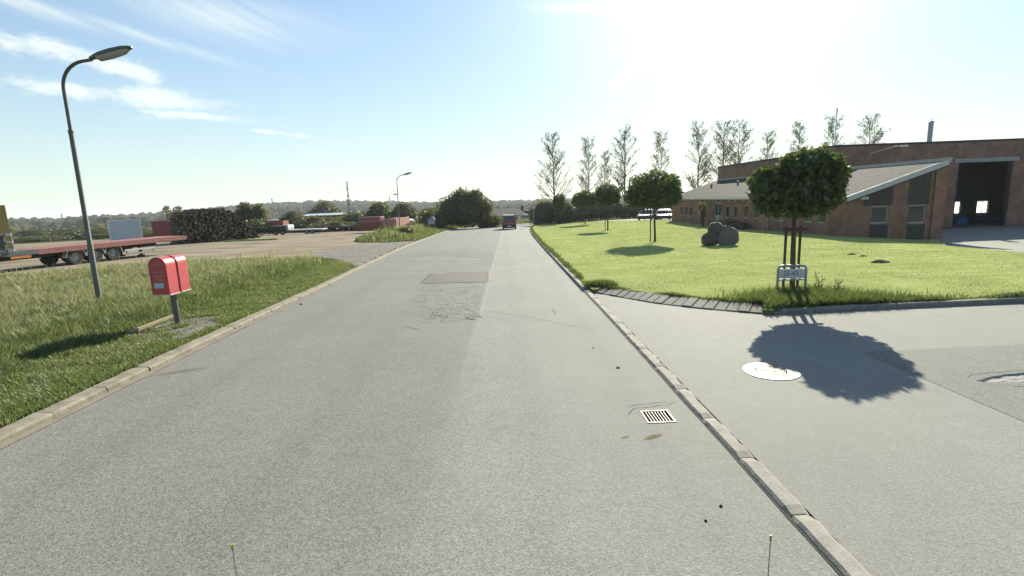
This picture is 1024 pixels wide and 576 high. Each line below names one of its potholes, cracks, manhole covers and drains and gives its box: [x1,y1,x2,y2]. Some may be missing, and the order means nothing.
crack [409,283,589,330]
manhole cover [742,362,801,381]
drain grate [640,410,677,424]
